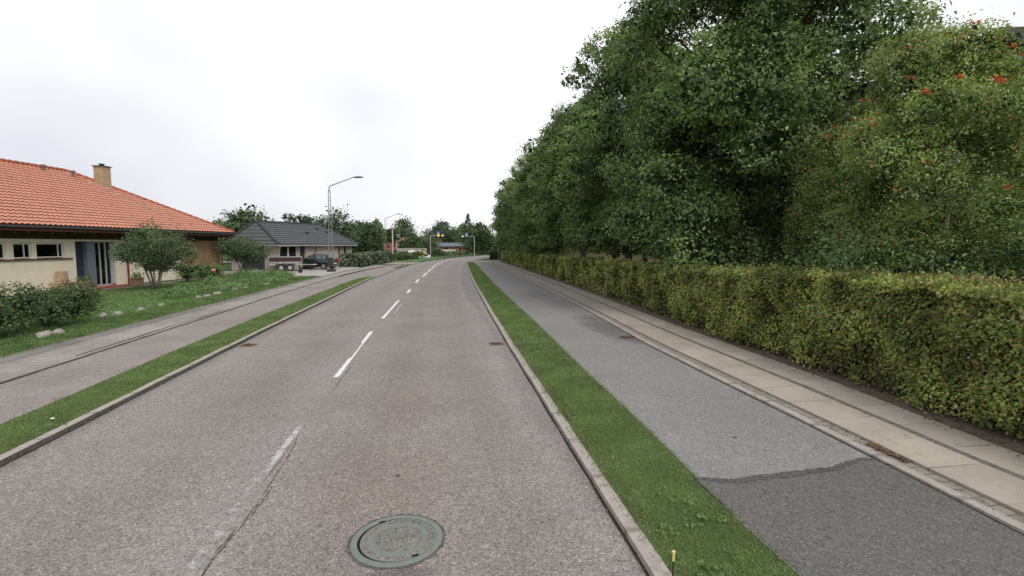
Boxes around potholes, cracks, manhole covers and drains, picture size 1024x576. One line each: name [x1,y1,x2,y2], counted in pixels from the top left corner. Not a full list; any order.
manhole cover [347,514,445,570]
crack [201,437,298,576]
